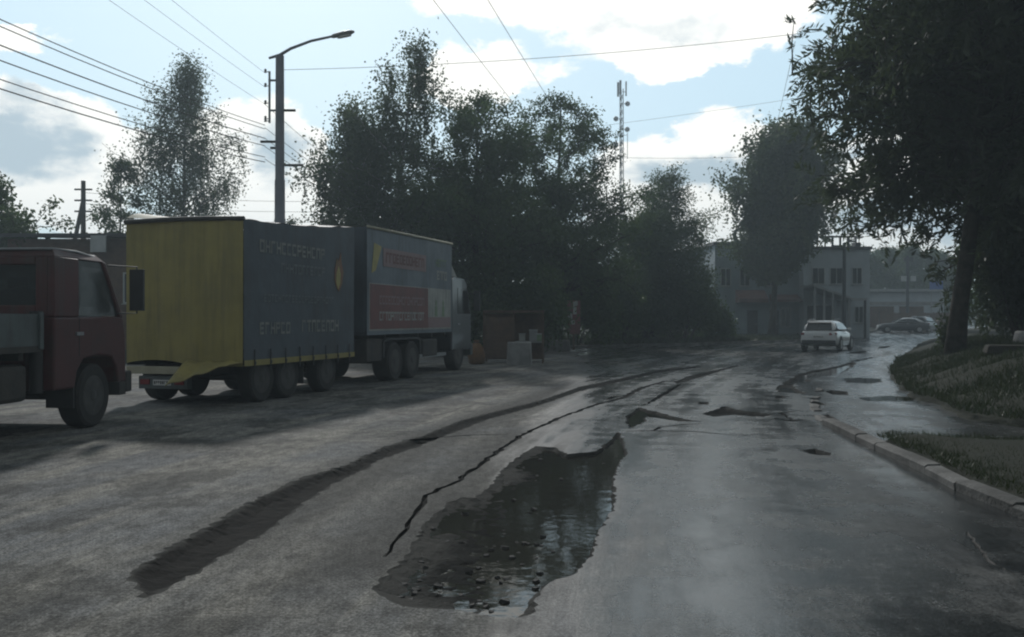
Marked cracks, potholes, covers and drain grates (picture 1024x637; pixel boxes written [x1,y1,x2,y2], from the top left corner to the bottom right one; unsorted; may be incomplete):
pothole [126,366,701,598]
pothole [703,406,772,417]
crack [966,532,1015,575]
crack [382,381,800,557]
pothole [775,362,856,394]
